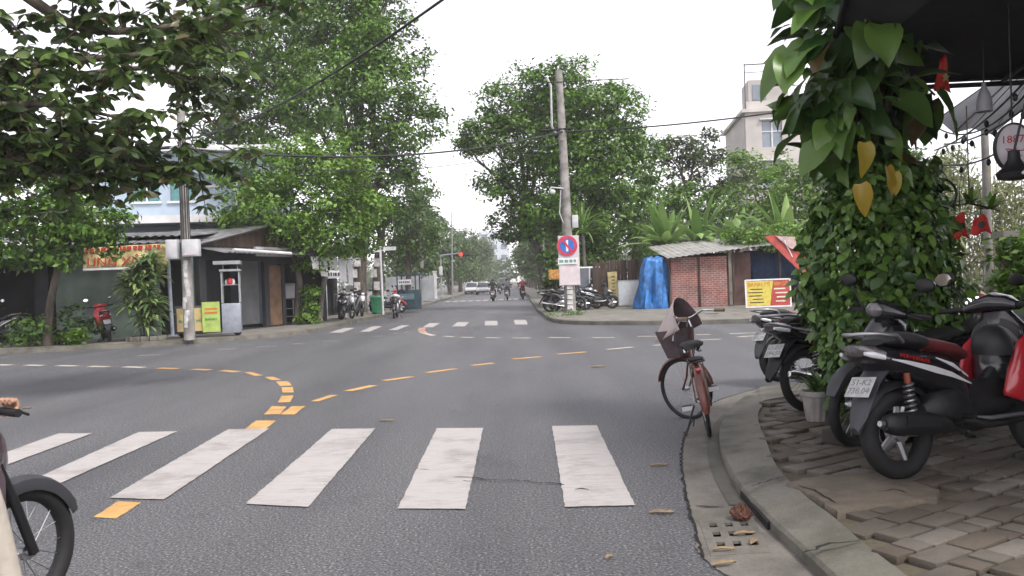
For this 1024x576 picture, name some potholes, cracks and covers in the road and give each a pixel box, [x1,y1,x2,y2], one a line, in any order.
drain grate [740,491,770,530]
crack [799,485,907,502]
crack [464,477,585,489]
drain grate [698,518,771,556]
